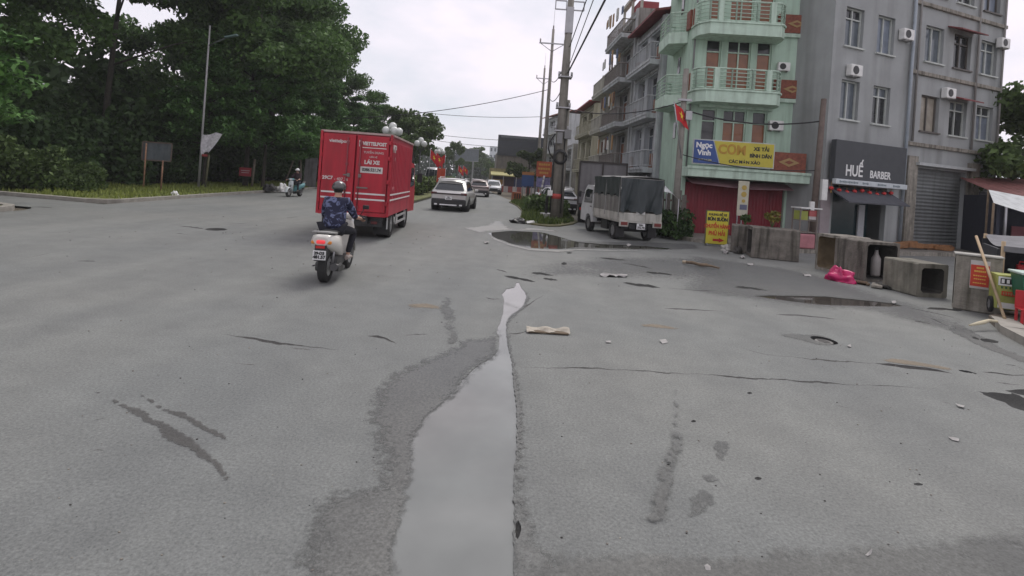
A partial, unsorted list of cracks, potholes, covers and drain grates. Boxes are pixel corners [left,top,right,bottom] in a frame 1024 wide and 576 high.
crack [227,334,335,365]
crack [524,348,1022,404]
manhole cover [810,336,838,345]
pothole [978,391,1024,411]
